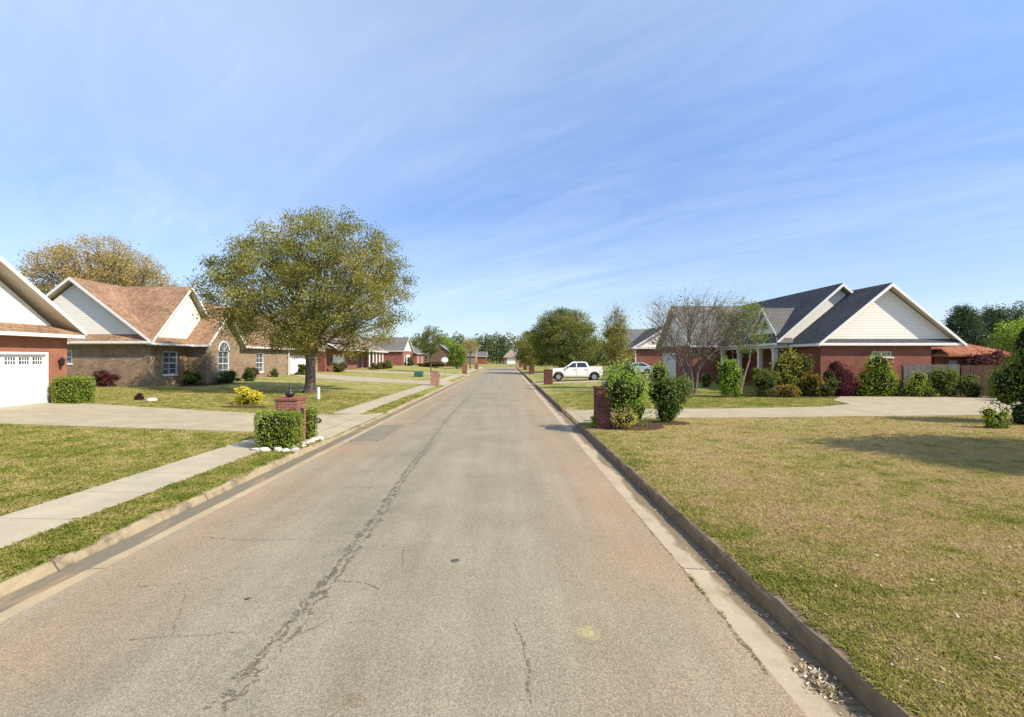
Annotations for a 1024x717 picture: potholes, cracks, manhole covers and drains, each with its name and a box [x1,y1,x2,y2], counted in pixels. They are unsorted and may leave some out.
crack [513,622,533,707]
crack [111,392,474,712]
